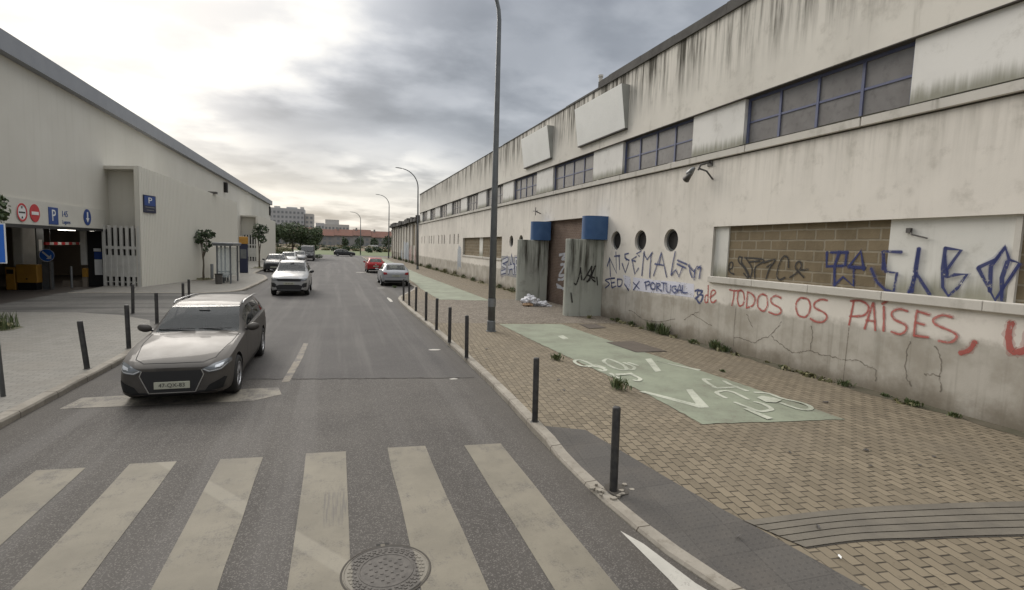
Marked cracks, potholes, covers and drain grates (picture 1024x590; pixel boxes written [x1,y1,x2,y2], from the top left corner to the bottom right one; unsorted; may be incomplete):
manhole cover [340,542,431,590]
utility cover [607,341,665,352]
